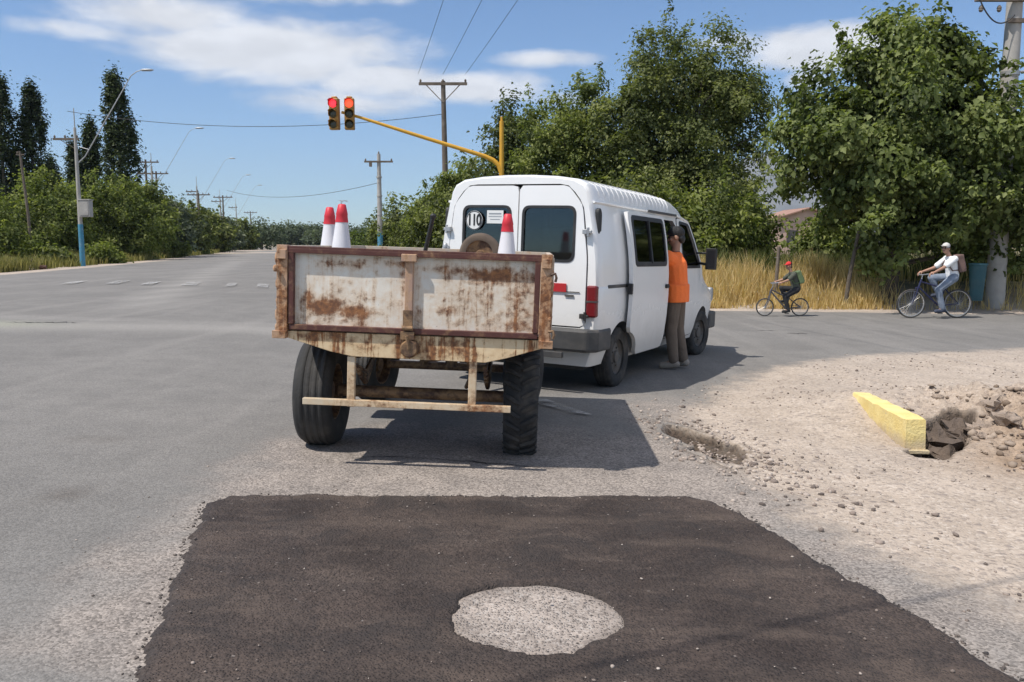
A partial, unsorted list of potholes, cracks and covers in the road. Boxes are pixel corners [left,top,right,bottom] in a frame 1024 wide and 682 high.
pothole [655,422,760,469]
